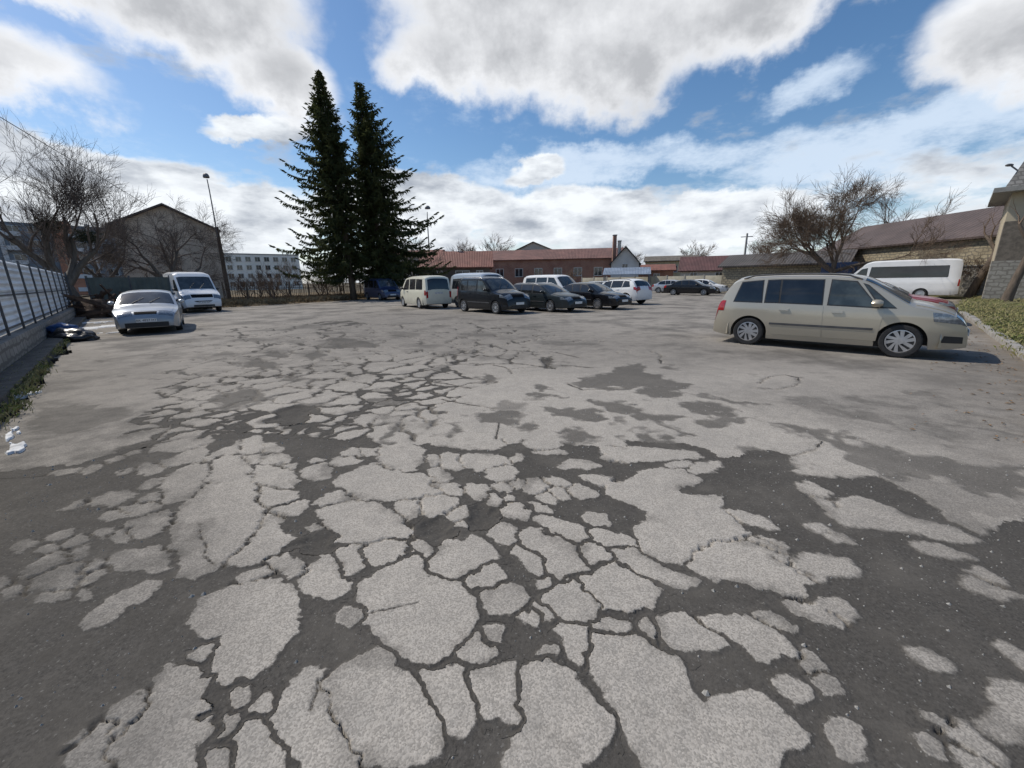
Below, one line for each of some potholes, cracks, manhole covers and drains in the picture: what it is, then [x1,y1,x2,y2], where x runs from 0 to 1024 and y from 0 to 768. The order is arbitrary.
crack [175,637,299,768]
crack [331,488,701,766]
crack [116,355,477,455]
